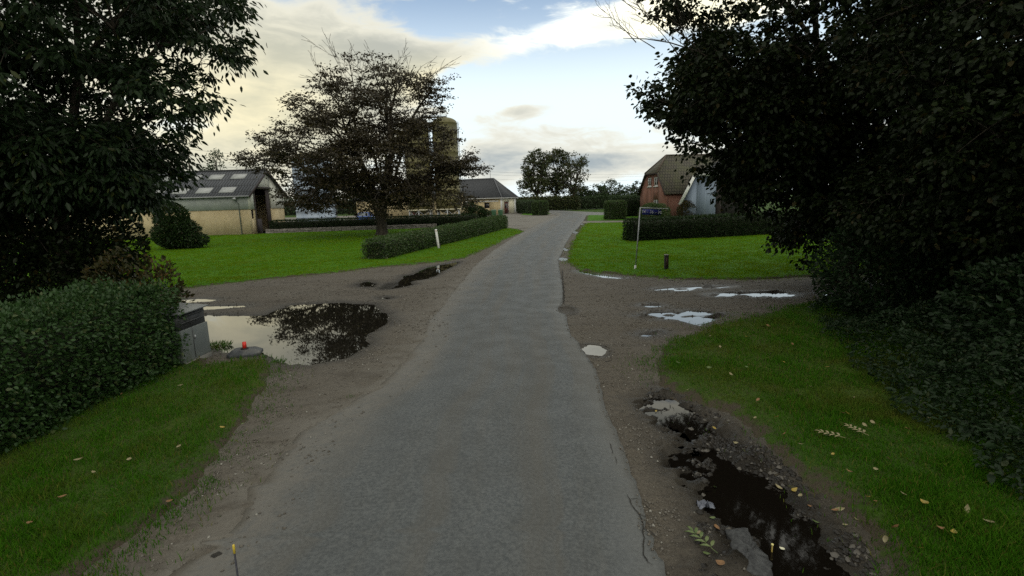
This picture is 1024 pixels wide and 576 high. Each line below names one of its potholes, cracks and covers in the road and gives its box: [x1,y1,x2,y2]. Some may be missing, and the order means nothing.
crack [627,495,655,564]
pothole [581,343,610,357]
